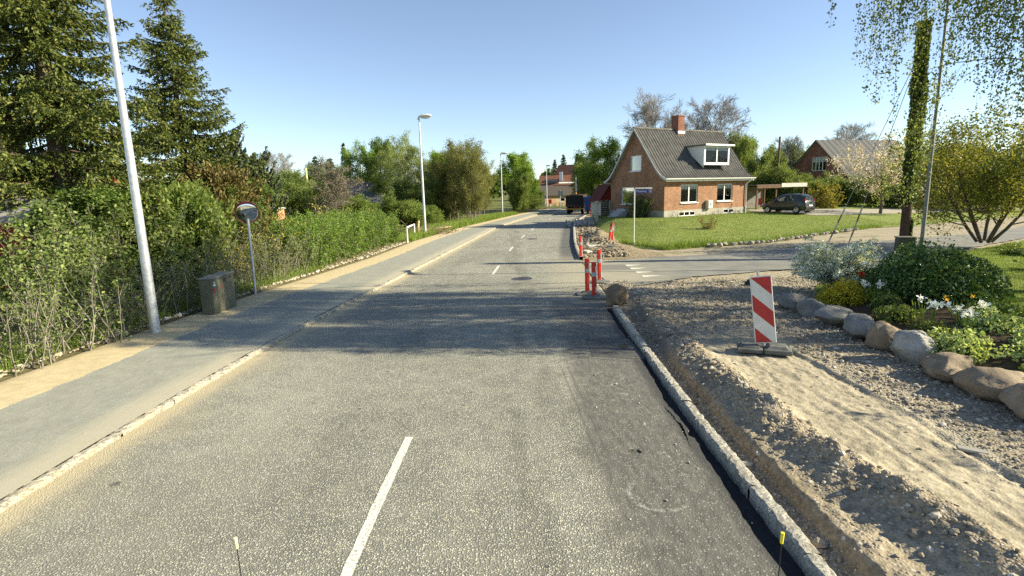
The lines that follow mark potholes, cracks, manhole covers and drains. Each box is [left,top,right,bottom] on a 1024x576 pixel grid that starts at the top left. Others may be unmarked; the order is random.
crack [664,407,691,447]
